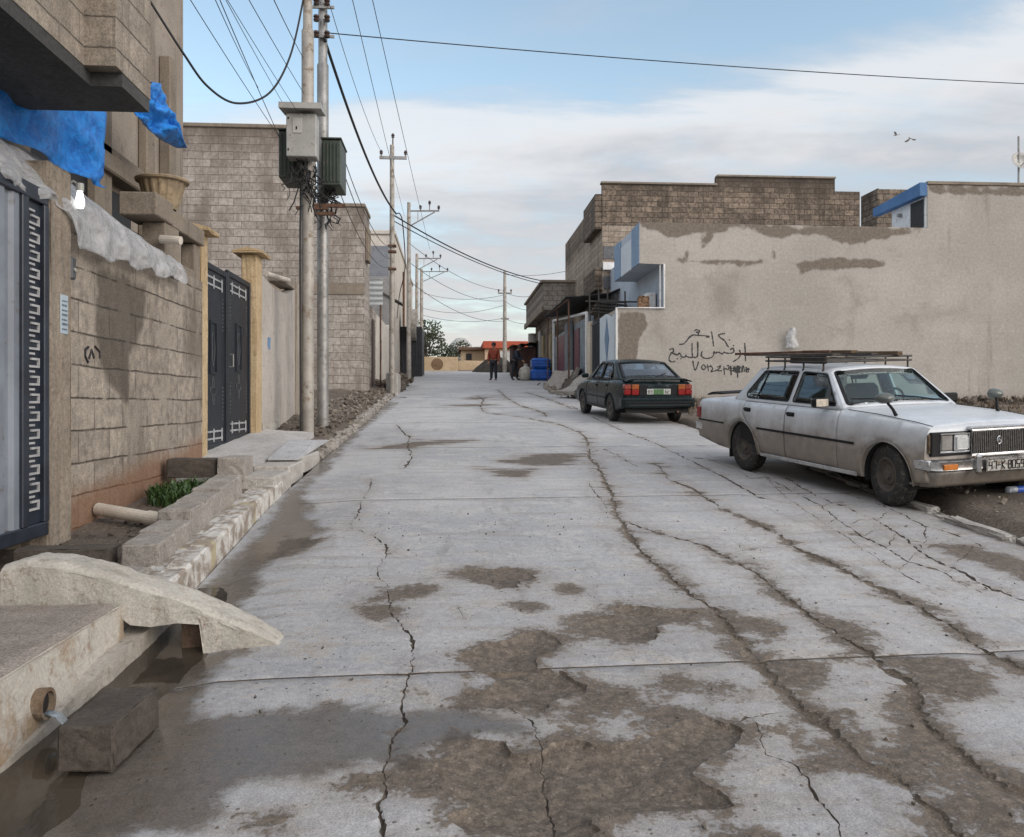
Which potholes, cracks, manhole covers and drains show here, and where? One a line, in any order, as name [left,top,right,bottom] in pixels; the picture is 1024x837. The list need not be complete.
crack [478,391,1024,837]
crack [396,425,412,468]
crack [351,482,416,837]
